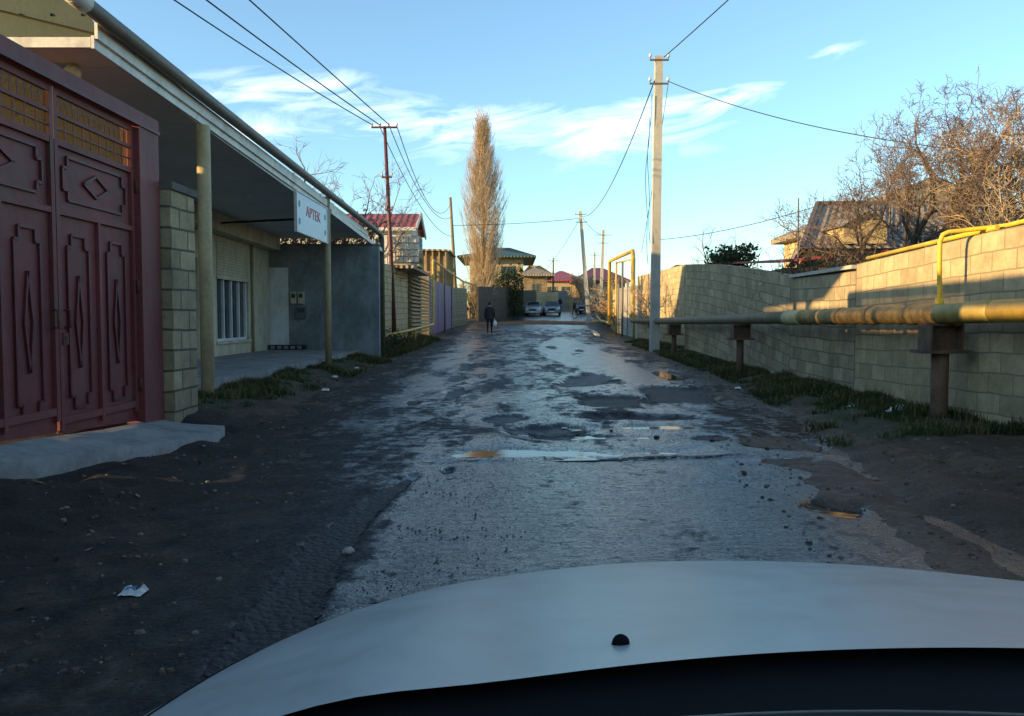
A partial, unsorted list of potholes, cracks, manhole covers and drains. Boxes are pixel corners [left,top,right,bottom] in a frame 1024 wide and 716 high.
pothole [573,393,655,408]
pothole [558,373,615,387]
pothole [638,384,725,404]
pothole [577,412,702,421]
pothole [500,423,590,438]
pothole [479,413,529,424]
